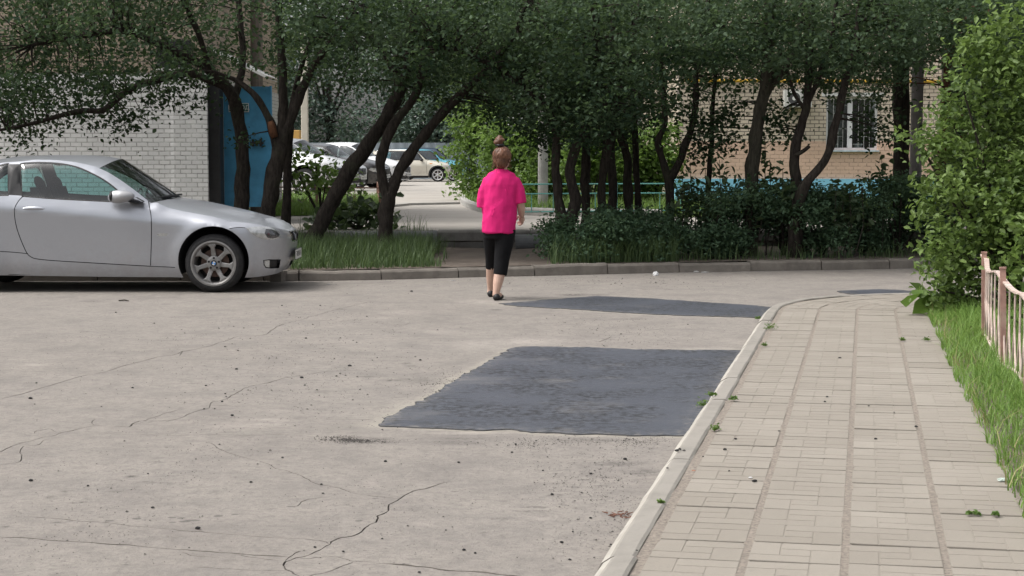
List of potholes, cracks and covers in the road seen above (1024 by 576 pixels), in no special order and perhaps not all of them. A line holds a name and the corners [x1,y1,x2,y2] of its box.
crack [2,301,409,399]
crack [6,442,516,576]
crack [0,372,368,465]
